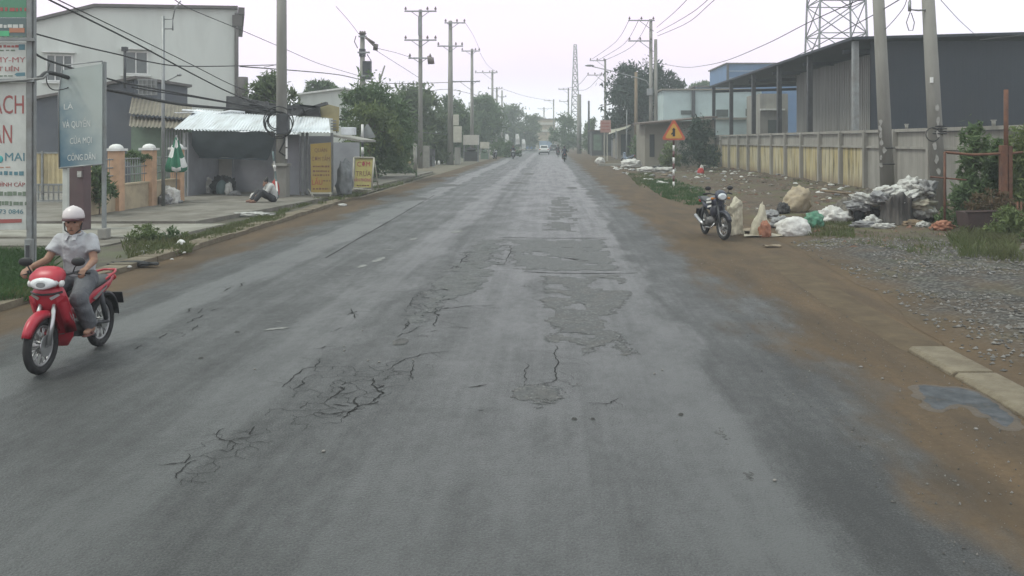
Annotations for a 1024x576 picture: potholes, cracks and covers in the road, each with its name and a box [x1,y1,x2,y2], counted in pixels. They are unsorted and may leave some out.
crack [265,309,445,428]
crack [165,426,271,484]
pothole [908,384,1024,431]
crack [393,241,514,336]
crack [501,347,588,385]
